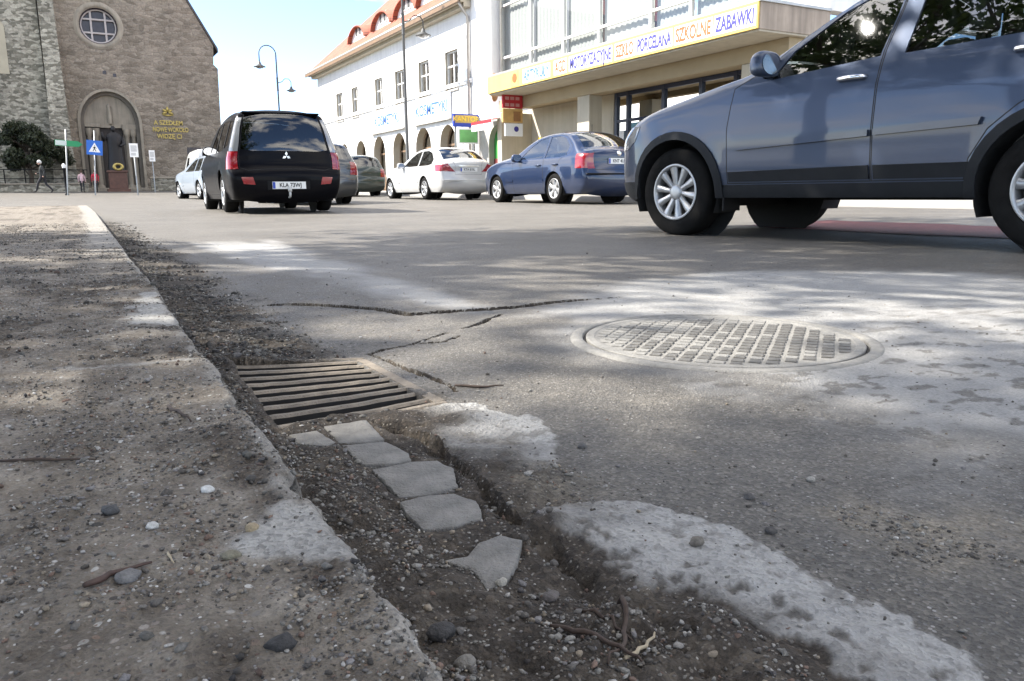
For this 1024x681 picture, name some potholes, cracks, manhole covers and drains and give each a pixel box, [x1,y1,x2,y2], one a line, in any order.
drain grate [236,358,447,429]
manhole cover [570,314,885,373]
crack [267,297,620,392]
